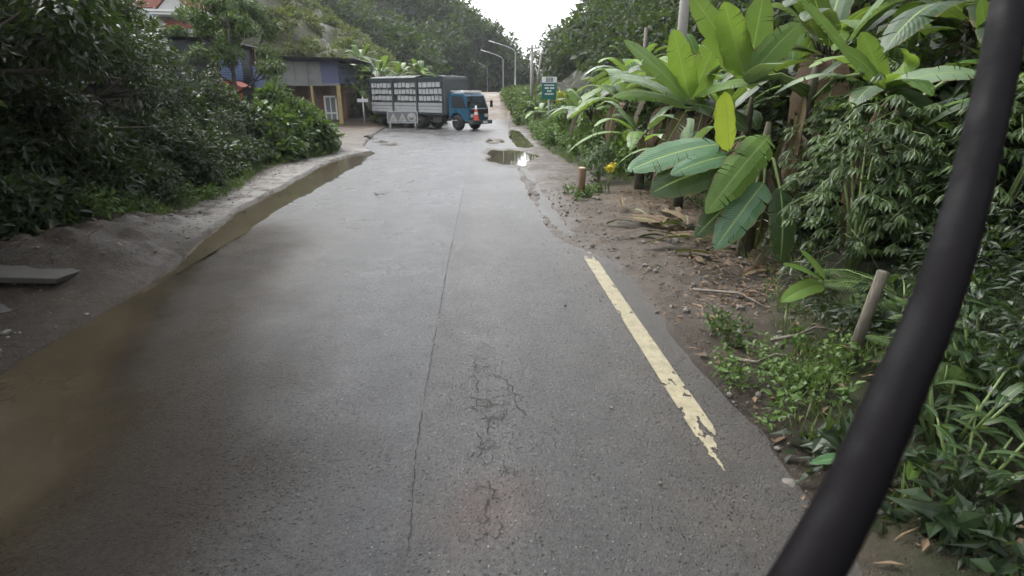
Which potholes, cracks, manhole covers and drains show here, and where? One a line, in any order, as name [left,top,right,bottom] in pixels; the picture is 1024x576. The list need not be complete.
crack [463,343,527,544]
pothole [481,148,539,167]
crack [407,190,464,548]
